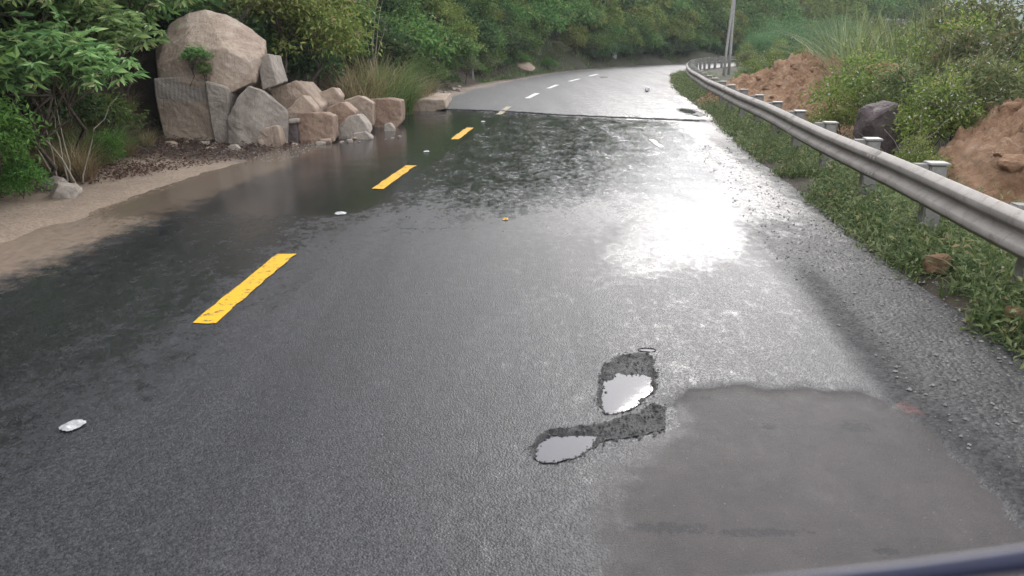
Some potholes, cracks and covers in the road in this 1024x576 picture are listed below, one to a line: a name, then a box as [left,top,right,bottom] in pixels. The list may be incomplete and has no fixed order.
pothole [593,351,663,415]
pothole [528,402,669,463]
pothole [676,107,706,117]
